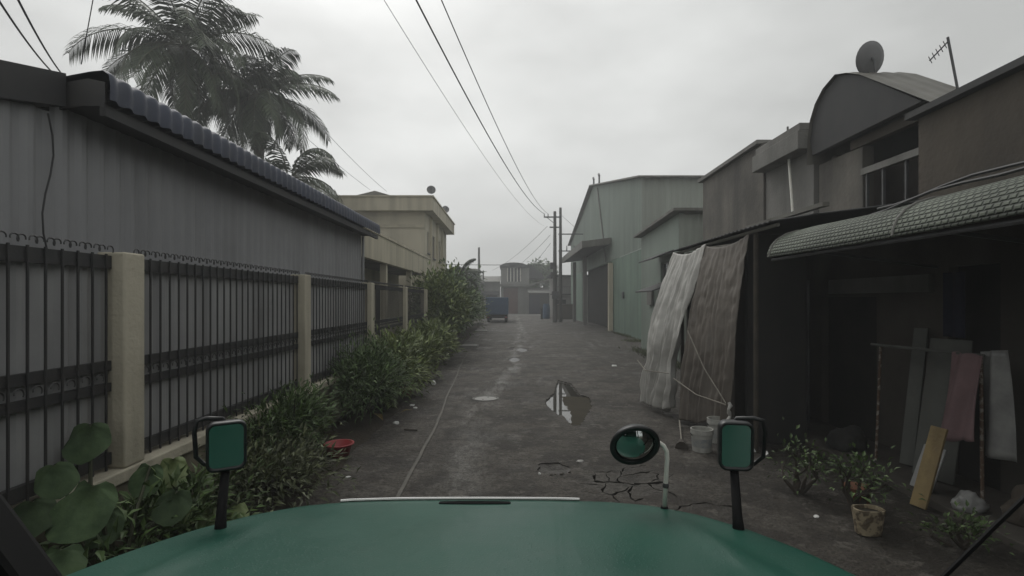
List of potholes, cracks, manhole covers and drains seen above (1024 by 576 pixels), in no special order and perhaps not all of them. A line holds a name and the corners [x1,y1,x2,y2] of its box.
crack [581,465,732,510]
